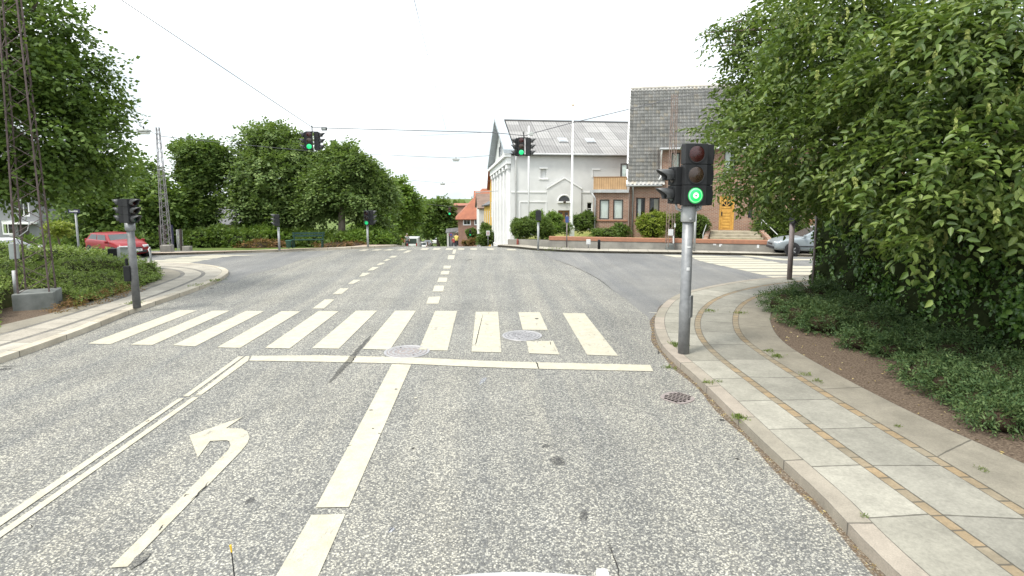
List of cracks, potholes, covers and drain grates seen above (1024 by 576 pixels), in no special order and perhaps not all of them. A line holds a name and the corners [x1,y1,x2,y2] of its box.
manhole cover [384,345,430,358]
manhole cover [502,330,542,341]
drain grate [660,392,695,404]
